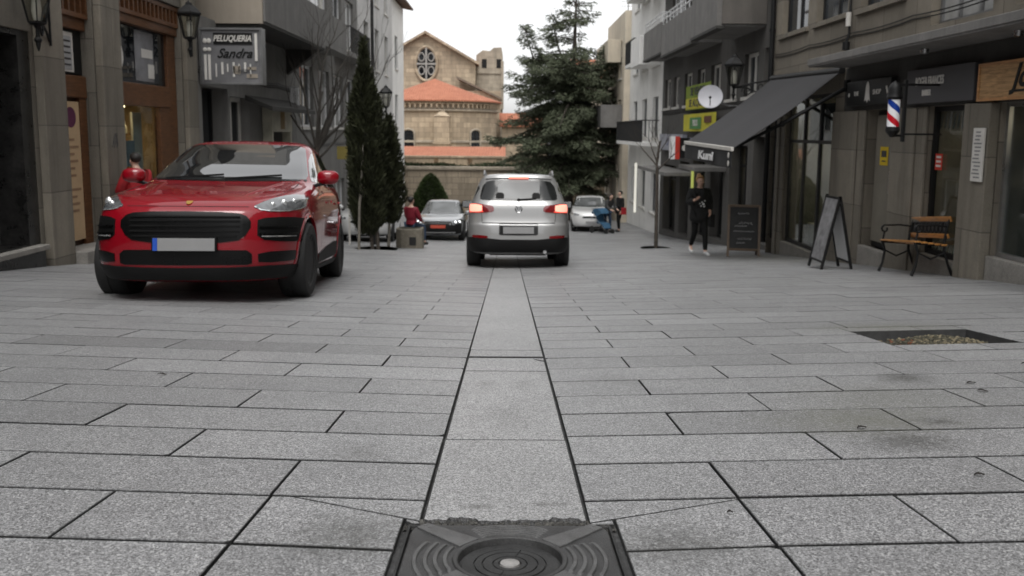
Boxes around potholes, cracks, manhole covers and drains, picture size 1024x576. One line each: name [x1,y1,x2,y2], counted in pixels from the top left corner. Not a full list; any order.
manhole cover [392,523,627,576]
